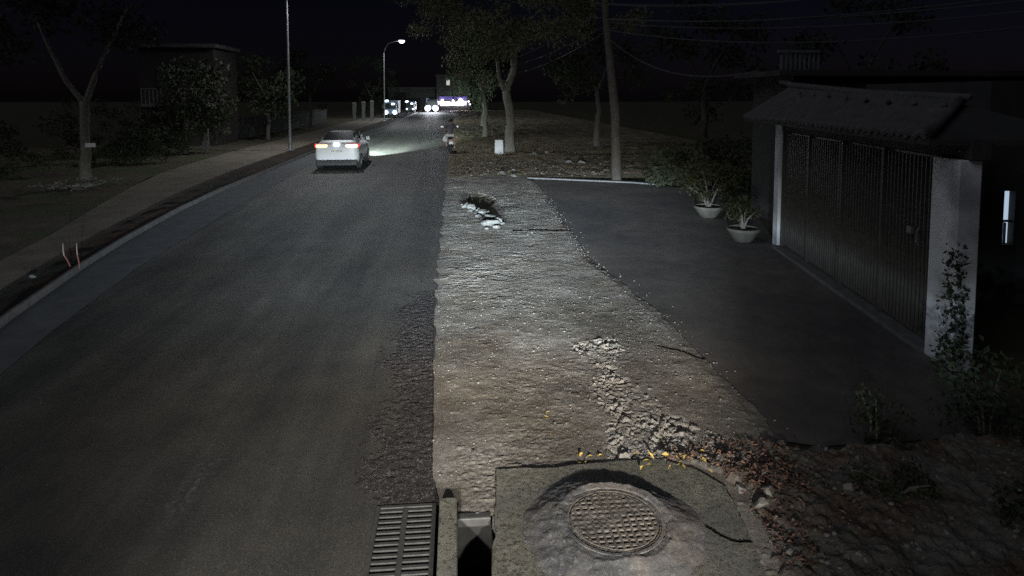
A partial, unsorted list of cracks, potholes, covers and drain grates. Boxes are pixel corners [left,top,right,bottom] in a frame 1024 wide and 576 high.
drain grate [457,512,493,576]
pothole [467,193,496,210]
manhole cover [564,489,666,556]
drain grate [364,503,439,576]
crack [704,523,752,543]
